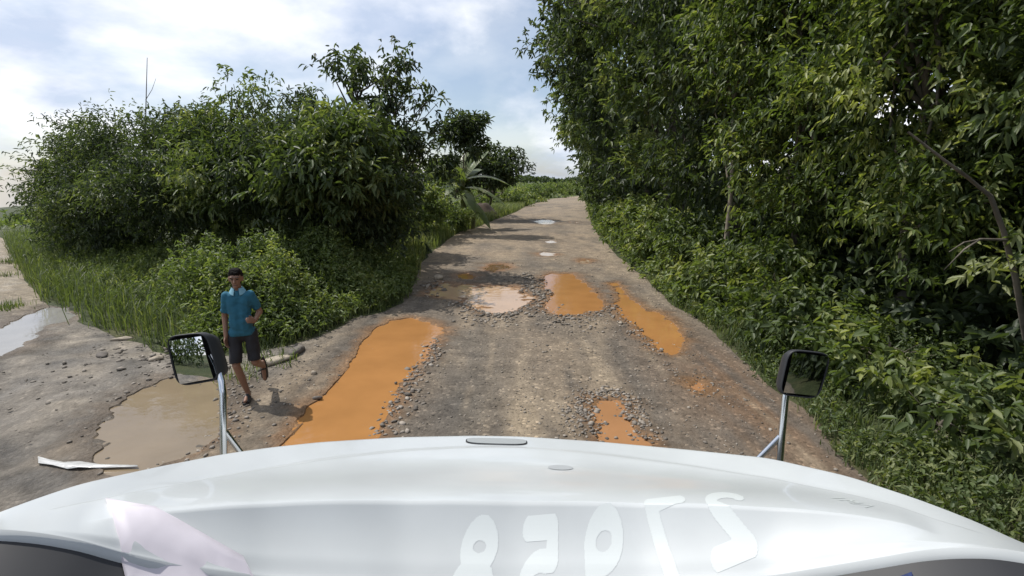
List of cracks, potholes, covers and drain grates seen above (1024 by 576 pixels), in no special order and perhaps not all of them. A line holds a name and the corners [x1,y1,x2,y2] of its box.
pothole [0,306,76,356]
pothole [590,398,653,446]
pothole [608,282,686,355]
pothole [542,273,604,315]
pothole [688,380,708,392]
pothole [483,263,512,272]
pothole [279,317,445,446]
pothole [424,282,536,313]
pothole [91,377,231,476]
